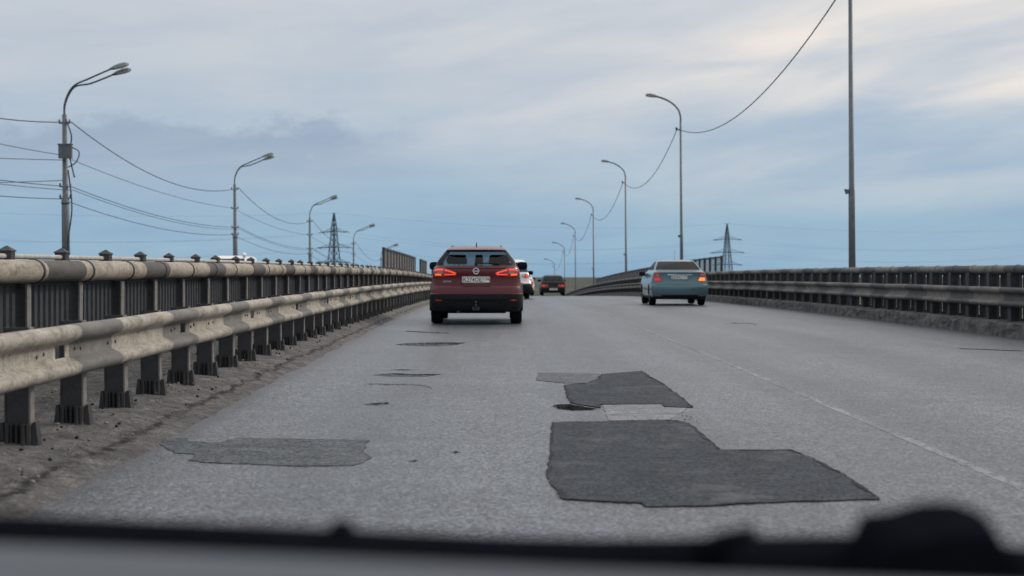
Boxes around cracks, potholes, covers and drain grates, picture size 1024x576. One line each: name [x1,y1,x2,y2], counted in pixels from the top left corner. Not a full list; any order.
pothole [355,383,432,394]
